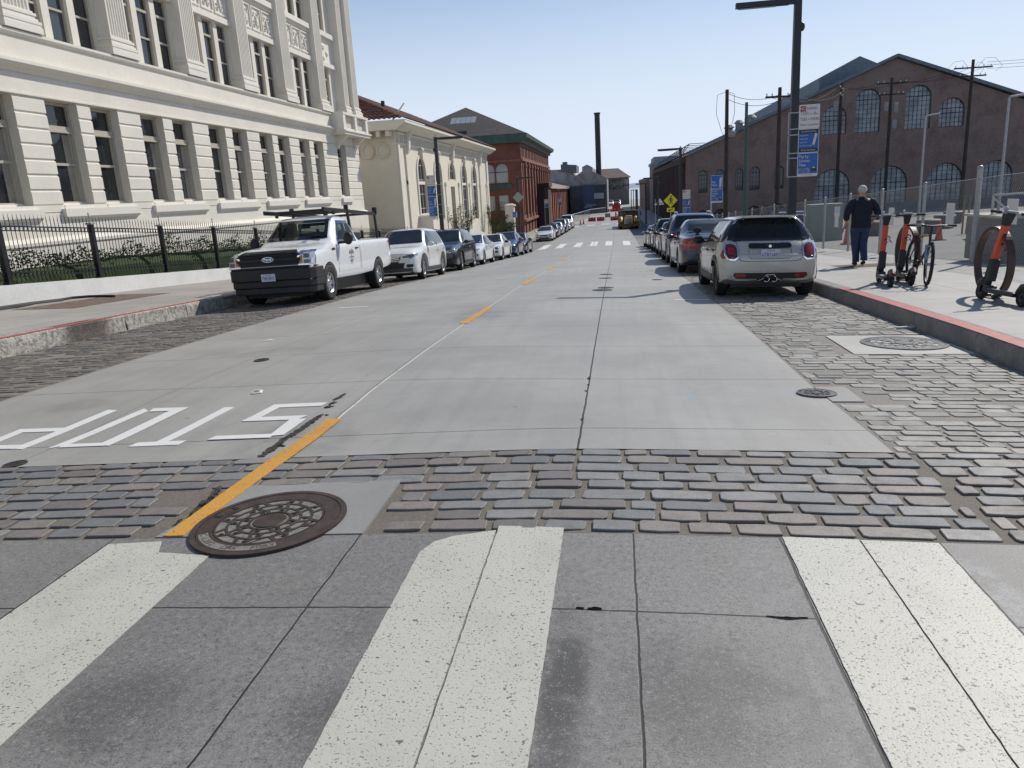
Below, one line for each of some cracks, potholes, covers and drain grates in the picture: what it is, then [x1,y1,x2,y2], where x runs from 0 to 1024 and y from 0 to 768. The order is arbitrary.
manhole cover [189,491,347,558]
manhole cover [796,388,837,398]
manhole cover [860,336,950,350]
utility cover [2,460,28,468]
